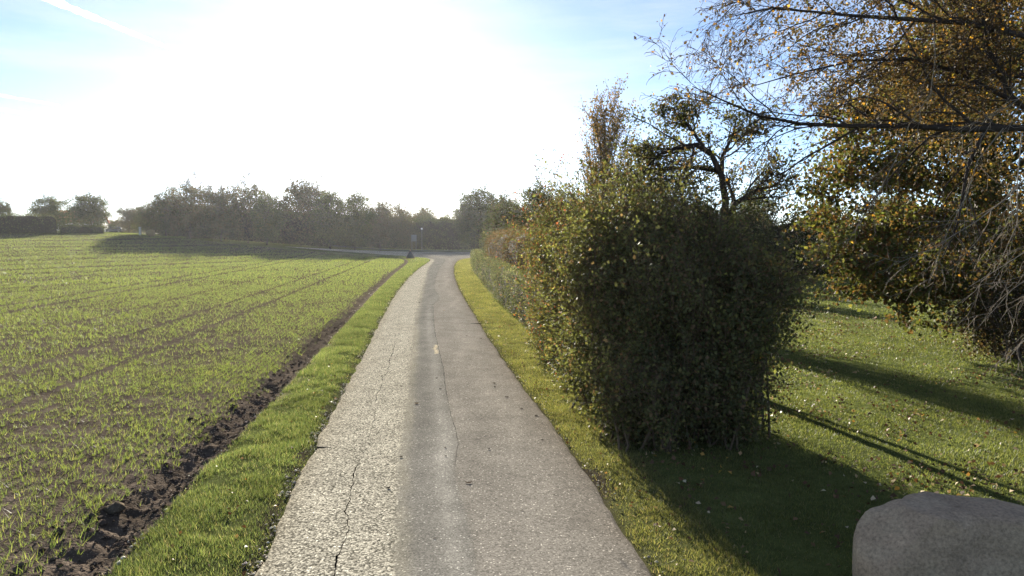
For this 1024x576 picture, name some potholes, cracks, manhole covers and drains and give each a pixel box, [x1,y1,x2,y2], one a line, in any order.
crack [333,346,395,576]
